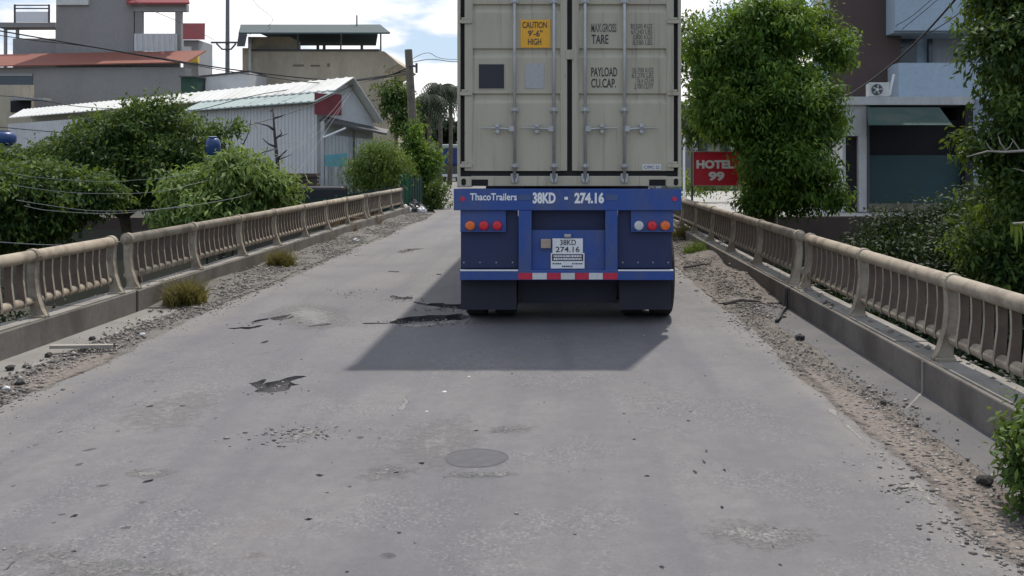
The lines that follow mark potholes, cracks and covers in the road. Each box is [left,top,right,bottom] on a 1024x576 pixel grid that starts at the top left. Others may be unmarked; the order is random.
pothole [249,376,306,392]
pothole [389,313,471,324]
manhole cover [445,448,509,467]
